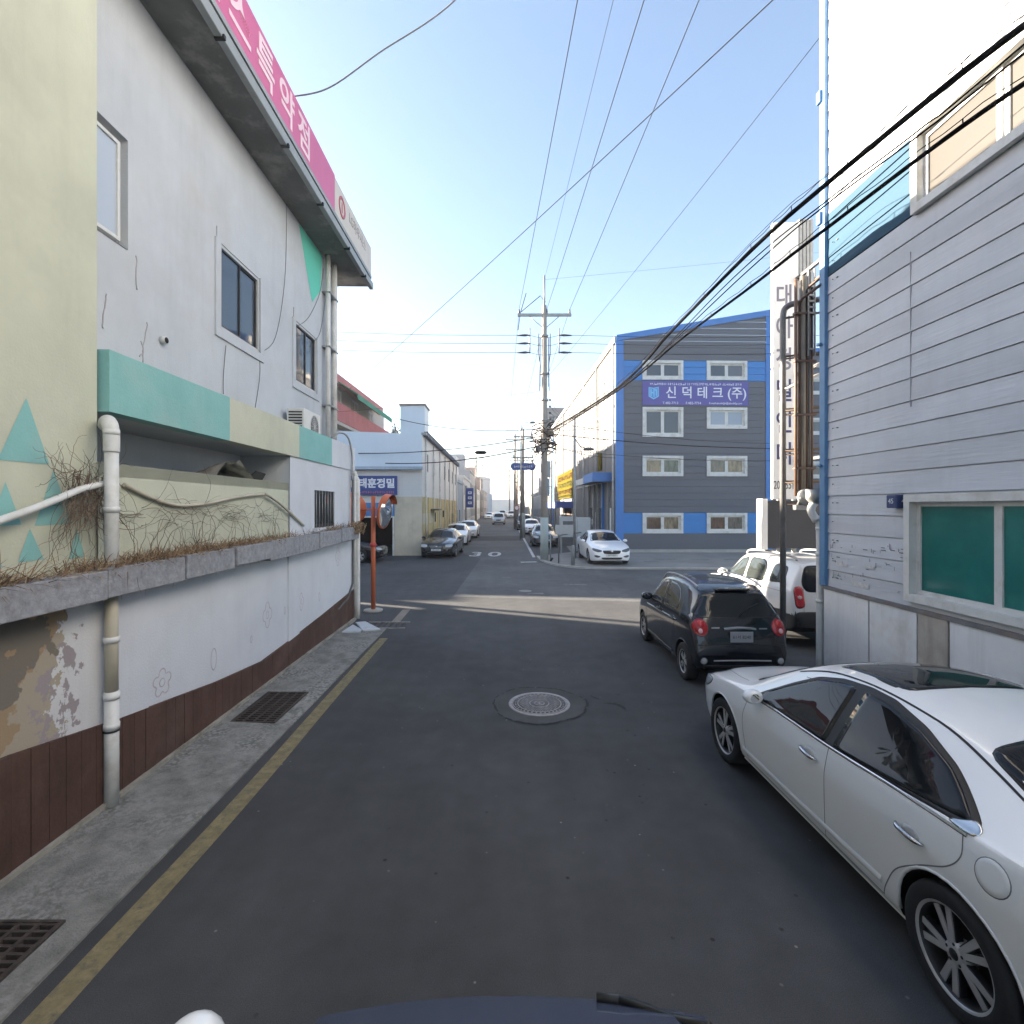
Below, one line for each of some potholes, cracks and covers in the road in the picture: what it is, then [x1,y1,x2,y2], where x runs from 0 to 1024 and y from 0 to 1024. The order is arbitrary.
crack [590,695,626,710]
manhole cover [492,687,589,725]
drain grate [0,919,66,983]
drain grate [230,692,309,723]
